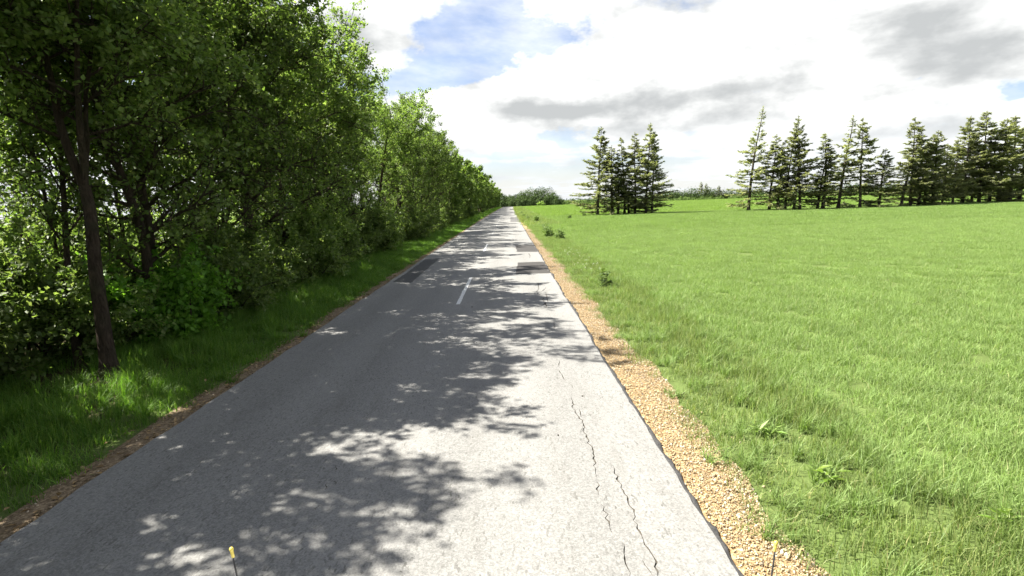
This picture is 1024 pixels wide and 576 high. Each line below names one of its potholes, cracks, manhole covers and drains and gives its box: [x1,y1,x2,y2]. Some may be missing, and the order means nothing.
crack [558,361,659,576]
